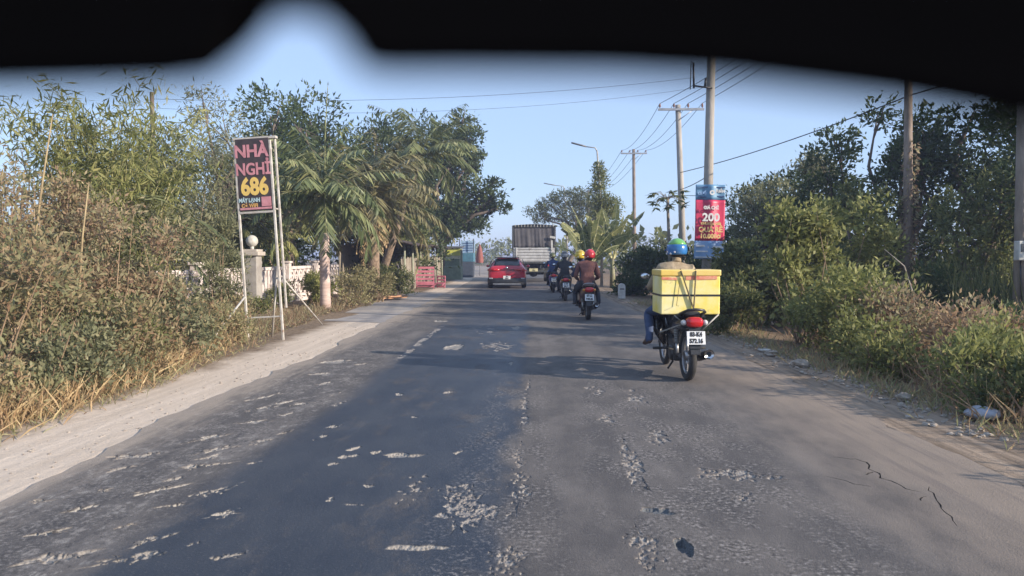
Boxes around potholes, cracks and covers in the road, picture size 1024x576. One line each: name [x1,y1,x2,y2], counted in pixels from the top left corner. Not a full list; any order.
crack [827,457,957,526]
pothole [673,537,694,558]
